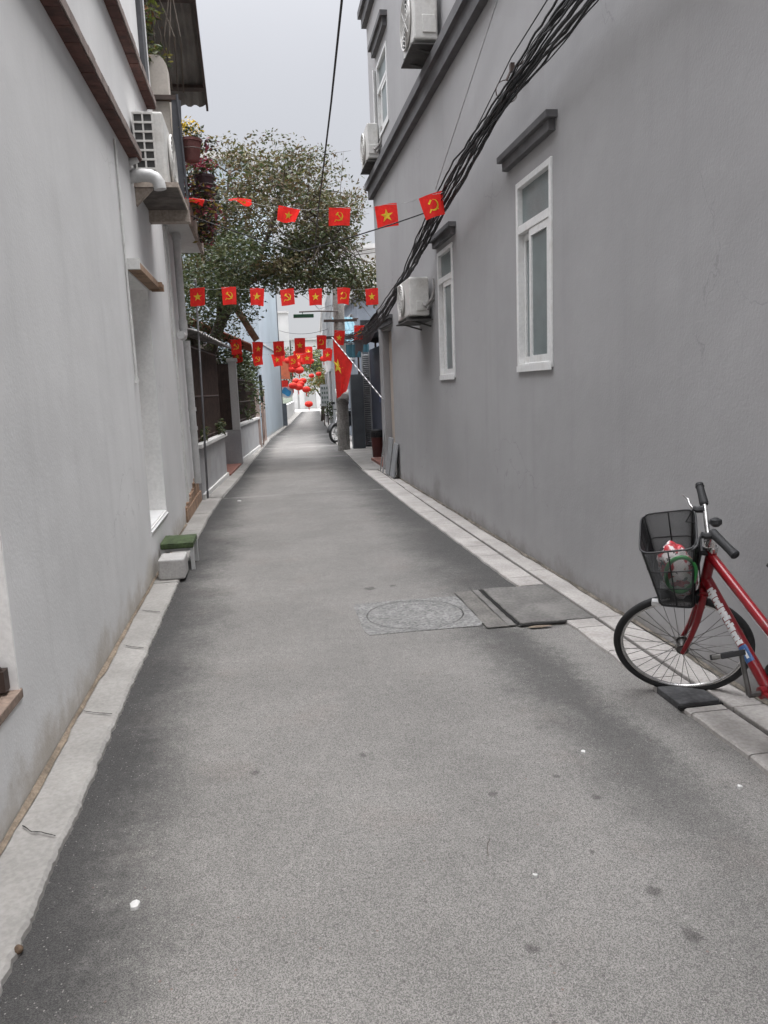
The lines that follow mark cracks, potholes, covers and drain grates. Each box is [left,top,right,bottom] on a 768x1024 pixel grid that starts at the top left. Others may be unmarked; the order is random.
manhole cover [354,596,482,635]
